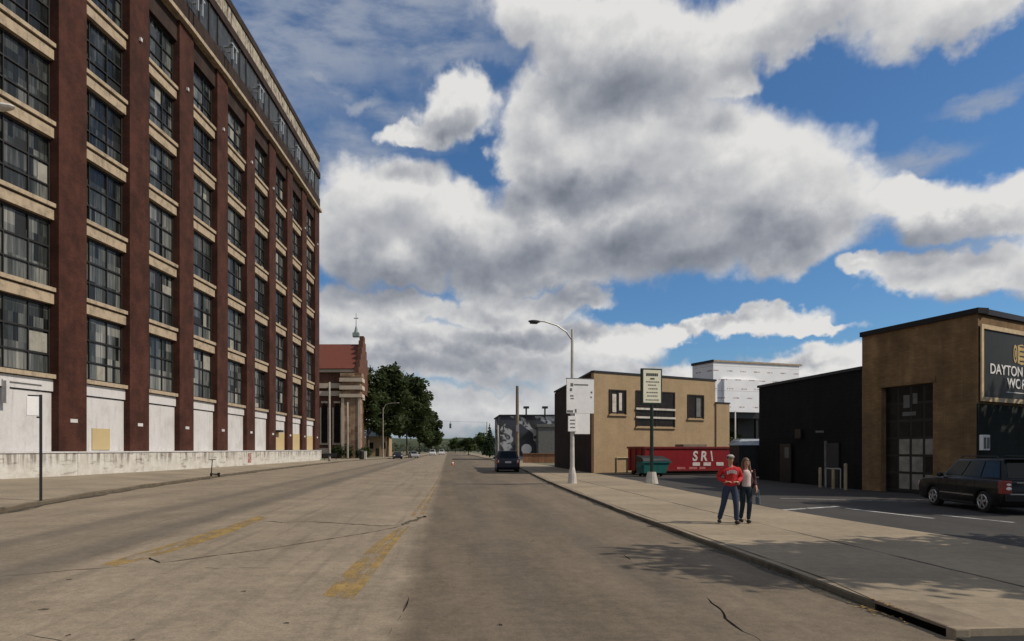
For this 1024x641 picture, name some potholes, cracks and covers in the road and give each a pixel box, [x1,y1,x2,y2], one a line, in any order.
crack [707,598,761,641]
drain grate [874,600,1004,641]
